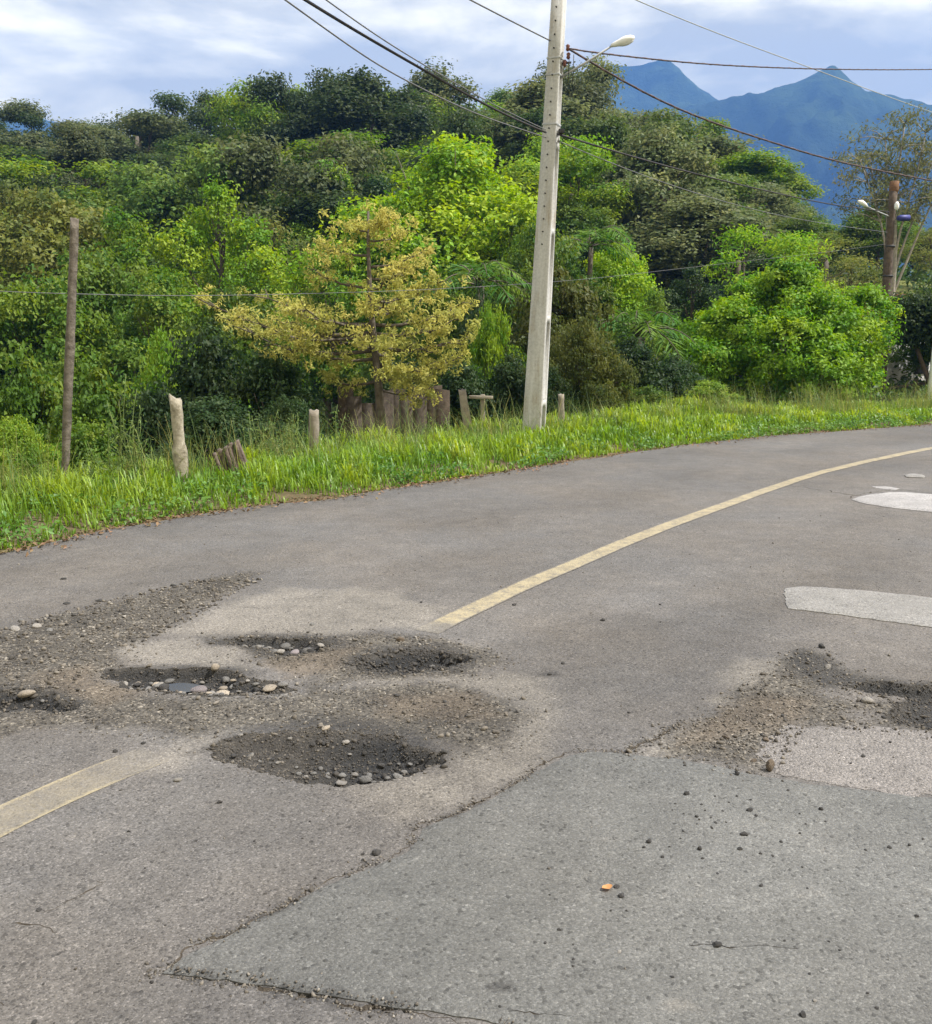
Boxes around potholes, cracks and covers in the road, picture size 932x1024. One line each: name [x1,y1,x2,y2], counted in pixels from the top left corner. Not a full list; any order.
pothole [215,637,334,657]
pothole [210,727,446,787]
pothole [347,649,471,675]
pothole [841,681,932,730]
pothole [99,667,294,698]
crack [152,749,607,1024]
